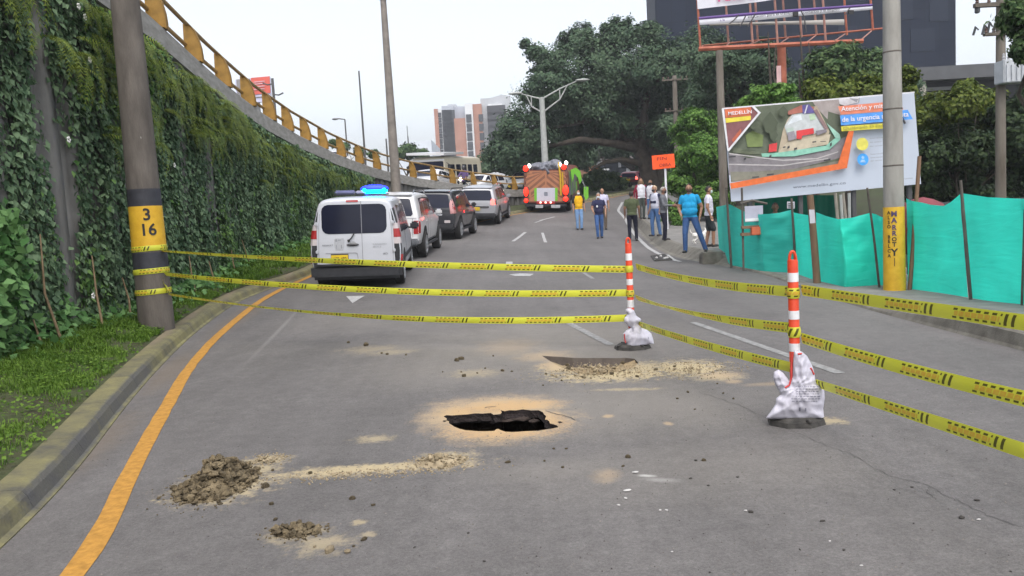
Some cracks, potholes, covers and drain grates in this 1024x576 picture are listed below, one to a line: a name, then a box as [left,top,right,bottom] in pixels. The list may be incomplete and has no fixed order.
pothole [543,356,638,375]
pothole [444,409,558,432]
